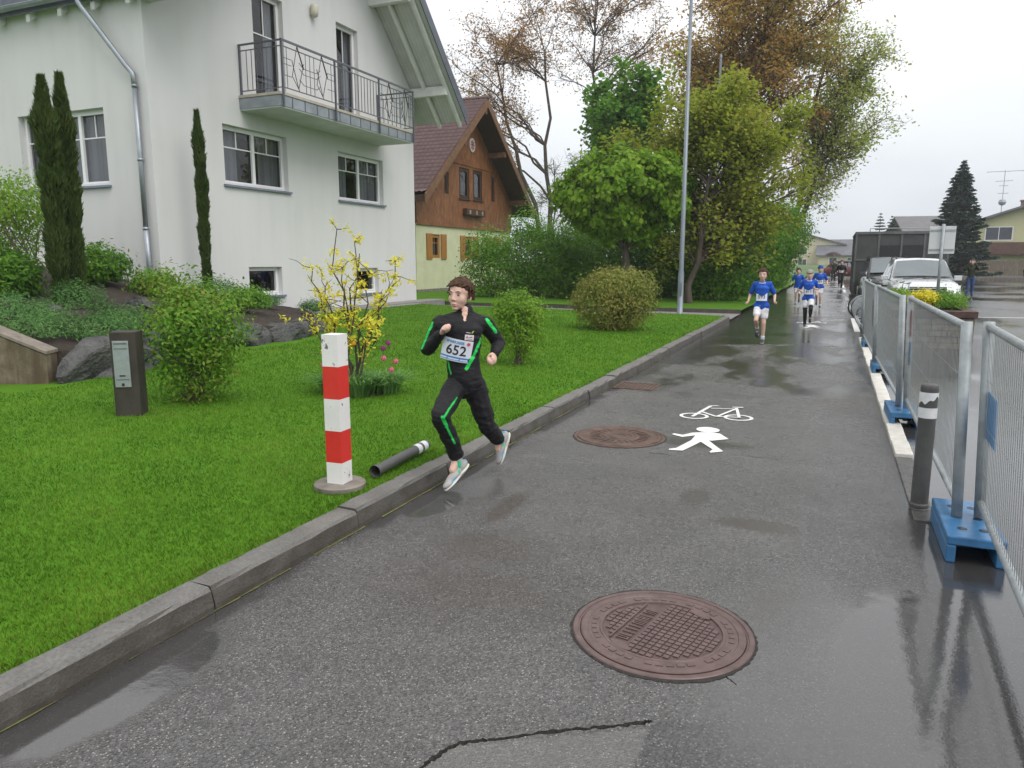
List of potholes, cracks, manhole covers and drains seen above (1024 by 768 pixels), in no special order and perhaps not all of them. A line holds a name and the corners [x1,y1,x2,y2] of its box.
crack [419,720,653,768]
manhole cover [573,426,667,448]
manhole cover [570,590,758,683]
